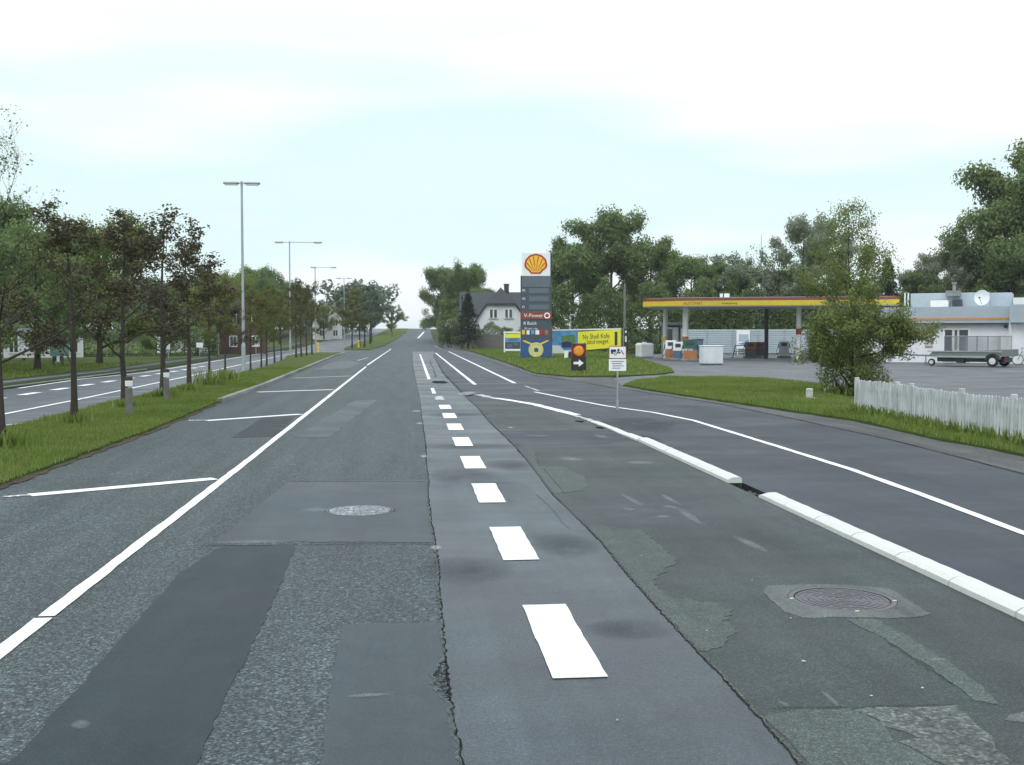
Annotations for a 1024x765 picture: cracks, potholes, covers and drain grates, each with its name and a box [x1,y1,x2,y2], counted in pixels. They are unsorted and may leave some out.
crack [412,355,465,765]
manhole cover [326,505,394,516]
crack [430,352,802,765]
manhole cover [788,586,897,612]
